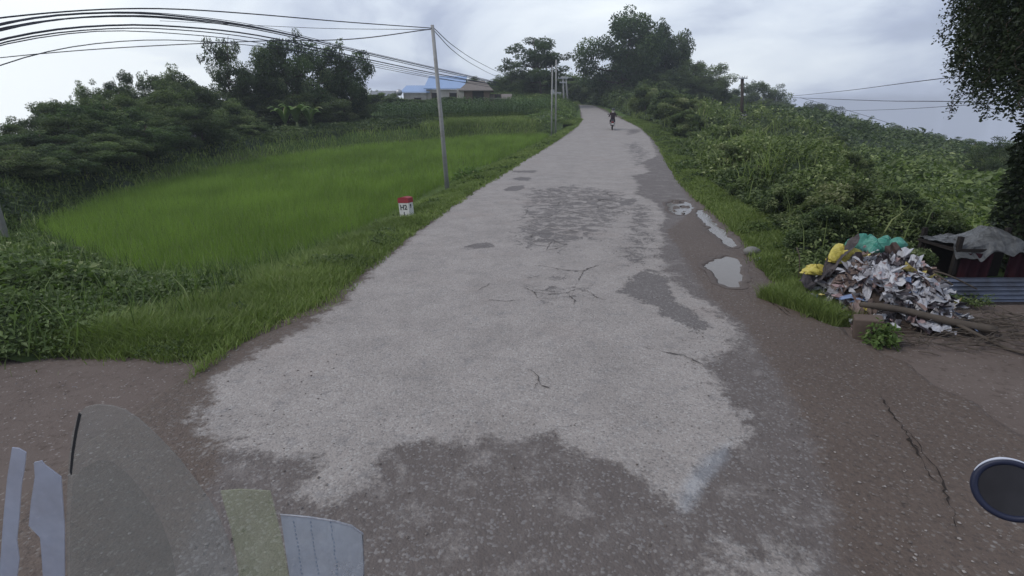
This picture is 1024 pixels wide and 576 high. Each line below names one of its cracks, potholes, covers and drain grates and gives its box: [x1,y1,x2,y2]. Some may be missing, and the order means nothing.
pothole [662,199,699,216]
crack [881,397,956,526]
pothole [697,254,751,289]
crack [479,189,629,303]
pothole [692,209,743,249]
